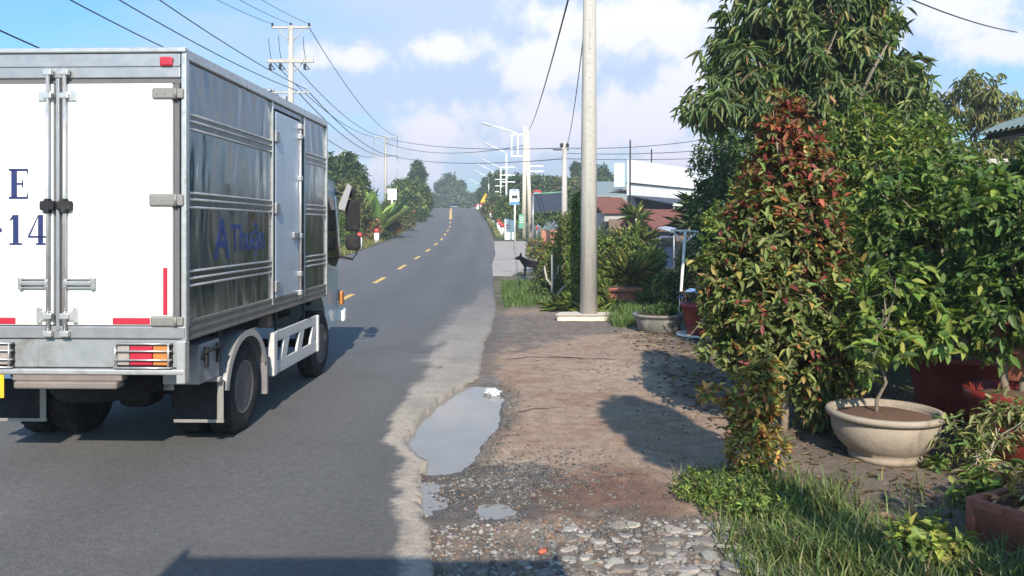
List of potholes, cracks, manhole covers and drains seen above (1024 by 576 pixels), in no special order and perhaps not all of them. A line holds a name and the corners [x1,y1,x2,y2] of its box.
pothole [406,383,507,520]
